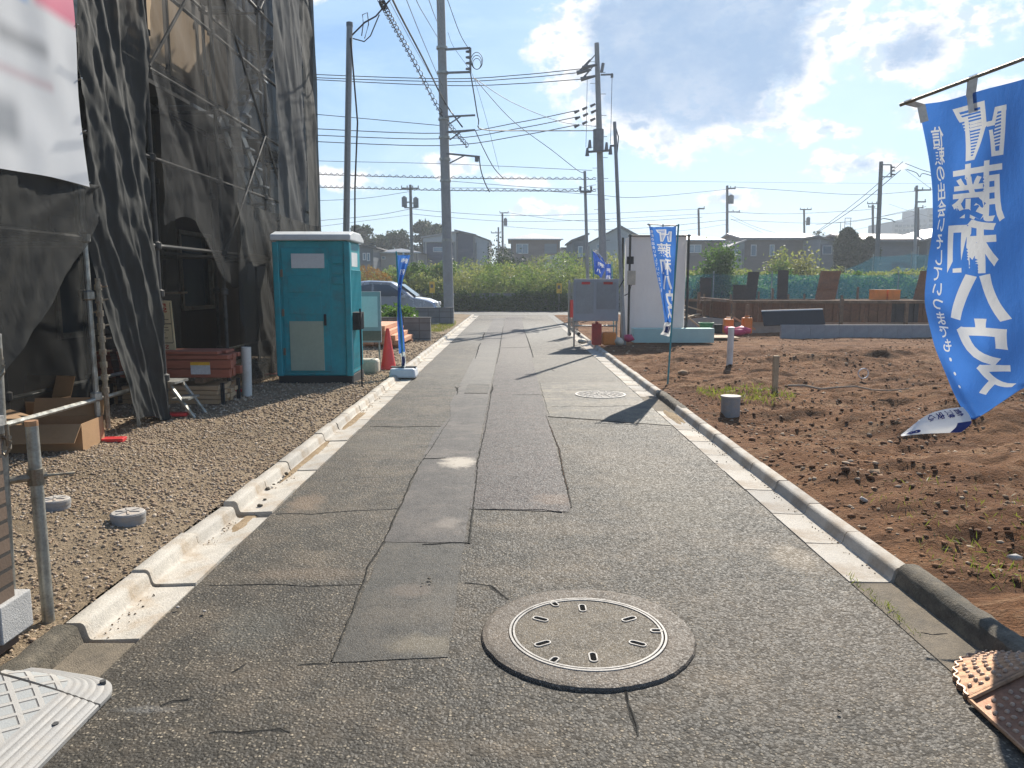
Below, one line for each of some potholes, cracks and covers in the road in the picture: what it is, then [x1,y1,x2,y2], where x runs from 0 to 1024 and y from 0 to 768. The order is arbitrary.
crack [209,727,291,735]
crack [464,582,508,600]
manhole cover [575,390,626,399]
crack [160,696,194,707]
crack [624,690,639,736]
manhole cover [481,589,697,693]
